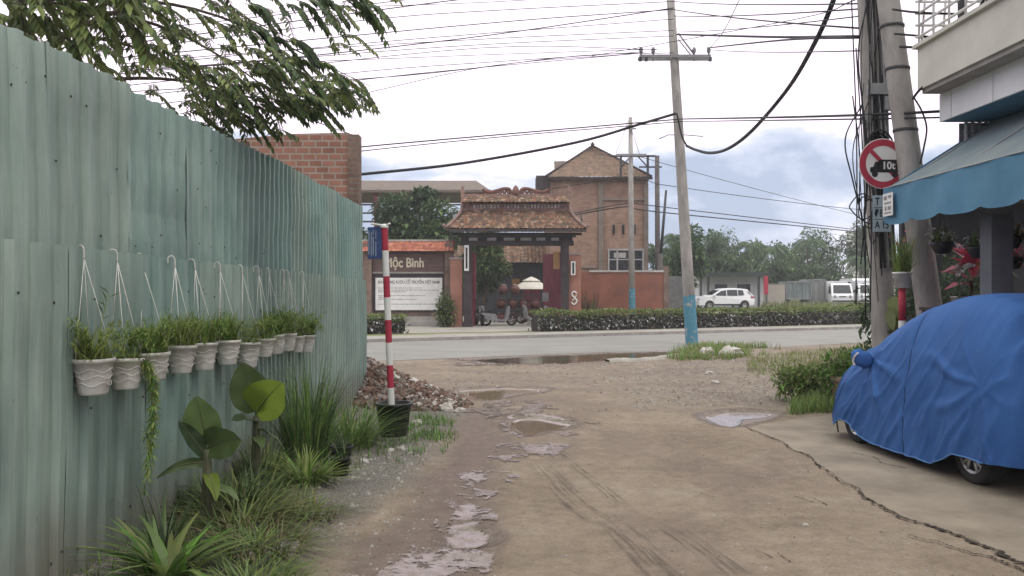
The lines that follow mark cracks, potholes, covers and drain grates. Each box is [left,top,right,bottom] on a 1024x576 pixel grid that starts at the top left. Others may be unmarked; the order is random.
pothole [694,408,782,427]
pothole [503,415,581,436]
pothole [458,350,687,364]
pothole [451,385,554,400]
crack [745,426,1024,571]
